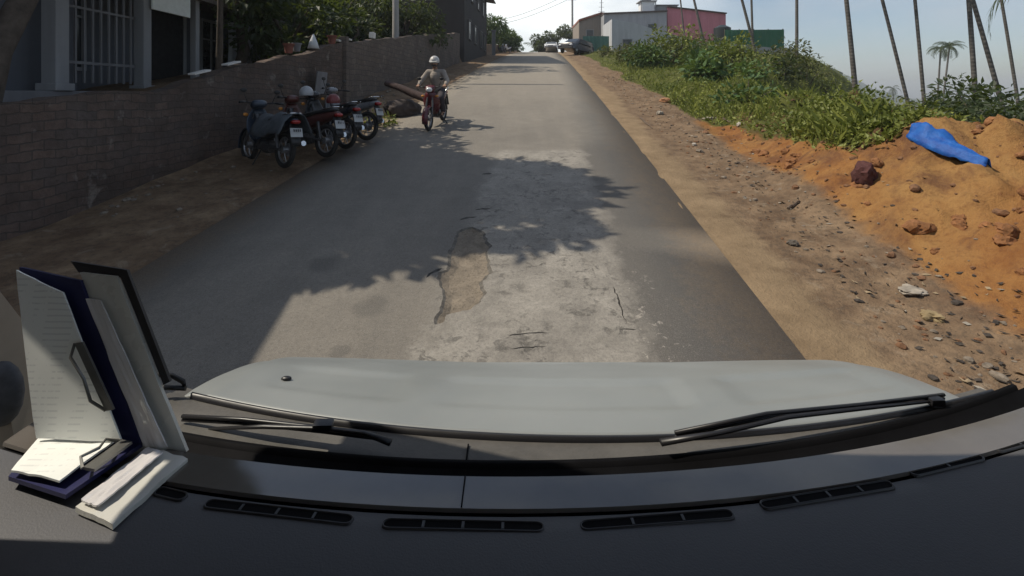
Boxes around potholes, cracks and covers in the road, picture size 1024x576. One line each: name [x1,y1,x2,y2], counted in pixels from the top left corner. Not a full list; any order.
crack [613,287,636,330]
pothole [434,227,493,324]
crack [510,332,547,349]
